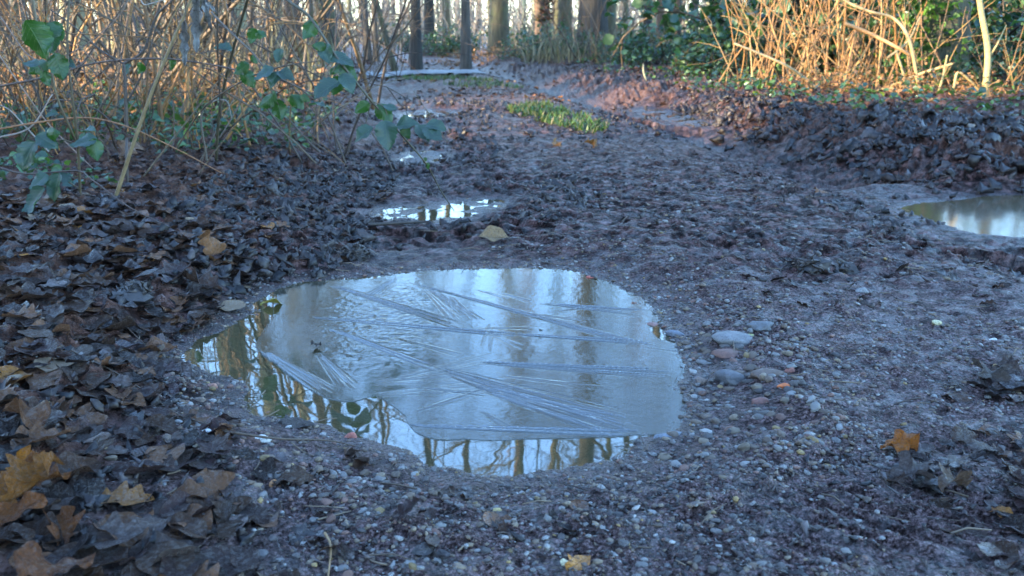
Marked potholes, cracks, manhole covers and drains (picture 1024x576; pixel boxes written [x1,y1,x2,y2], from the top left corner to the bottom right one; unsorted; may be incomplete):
pothole [889,191,1024,238]
pothole [158,262,710,491]
pothole [357,193,515,224]
